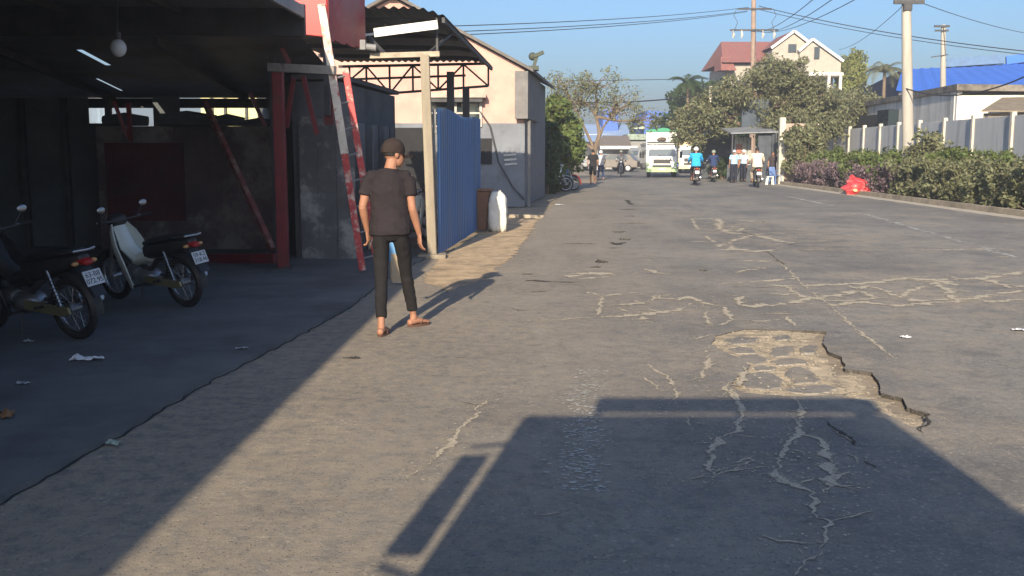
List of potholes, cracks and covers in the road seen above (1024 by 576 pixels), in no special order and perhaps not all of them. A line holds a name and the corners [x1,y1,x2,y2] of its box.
pothole [712,329,931,430]
crack [403,395,500,479]
crack [512,200,1024,575]
